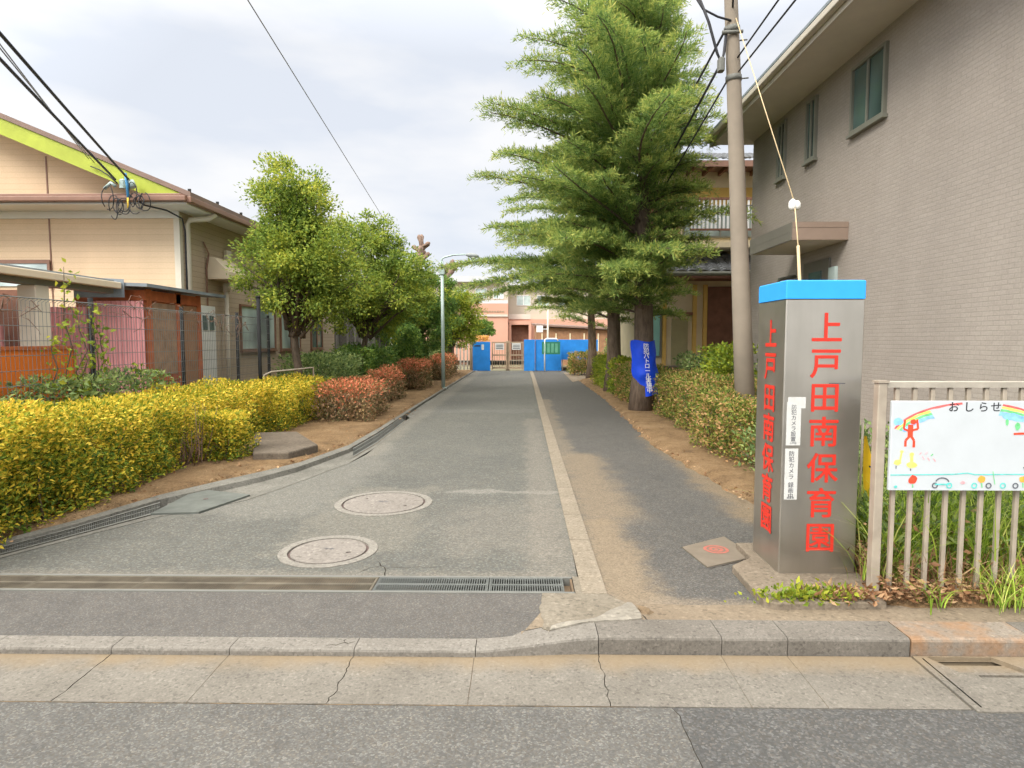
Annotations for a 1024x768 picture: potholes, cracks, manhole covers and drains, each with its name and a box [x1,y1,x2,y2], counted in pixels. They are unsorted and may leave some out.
manhole cover [334,491,432,516]
manhole cover [277,535,378,568]
drain grate [0,502,160,554]
crack [0,640,636,708]
utility cover [682,536,746,568]
drain grate [0,573,575,594]
